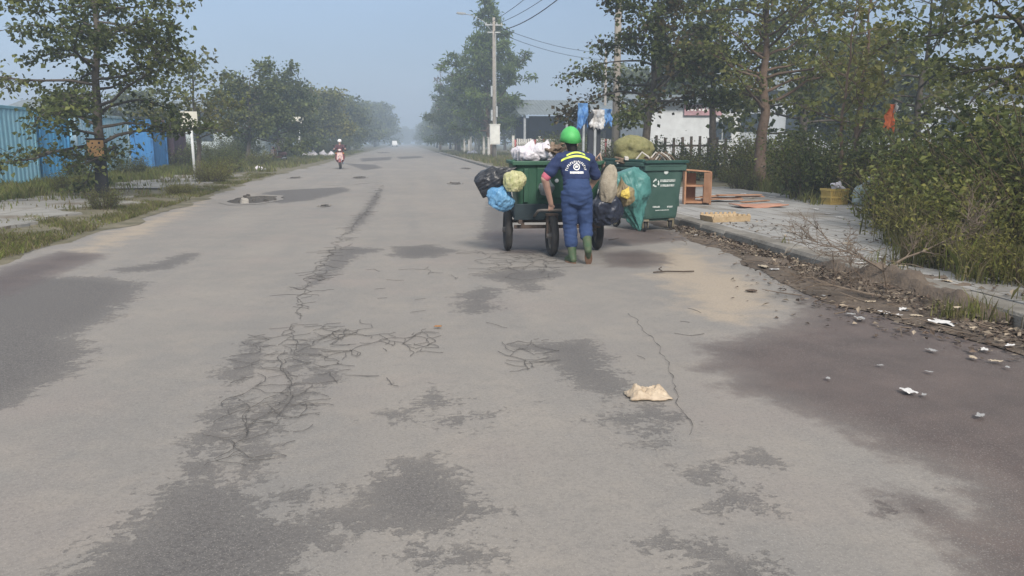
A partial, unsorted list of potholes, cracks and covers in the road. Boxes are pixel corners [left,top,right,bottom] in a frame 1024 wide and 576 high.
crack [272,182,384,316]
crack [486,322,559,371]
crack [460,248,578,280]
crack [628,308,704,434]
crack [201,319,443,465]
pothole [219,194,283,205]
